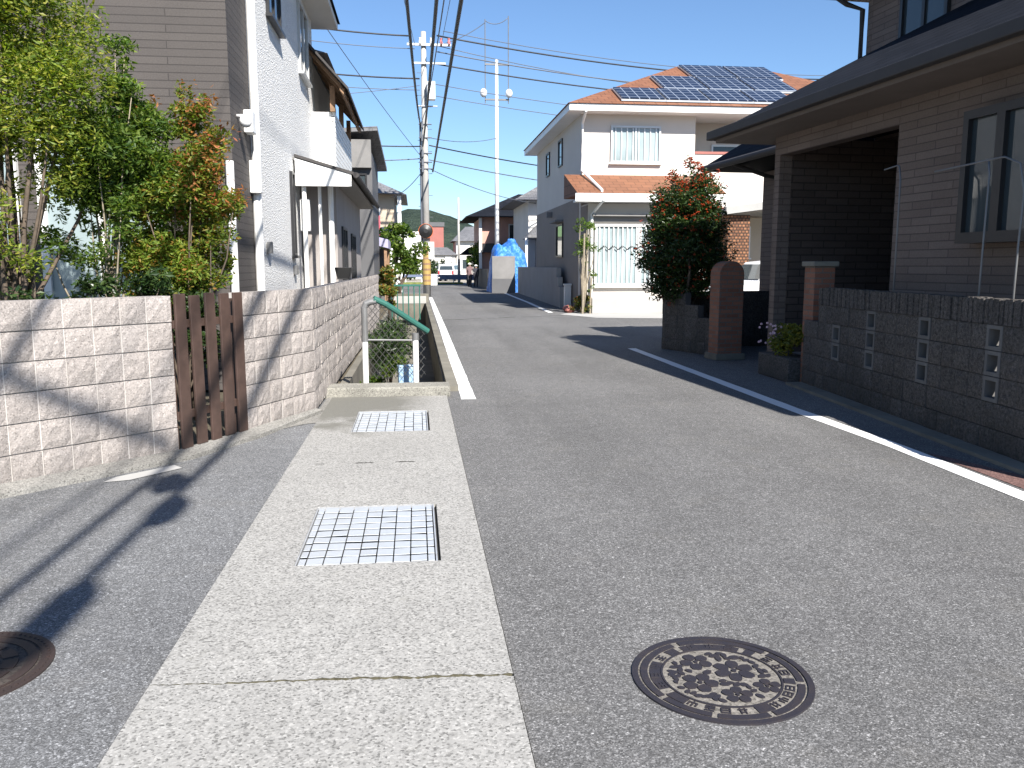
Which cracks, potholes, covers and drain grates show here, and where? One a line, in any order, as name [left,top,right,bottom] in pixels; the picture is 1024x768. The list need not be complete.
manhole cover [0,631,56,697]
manhole cover [632,636,815,726]
